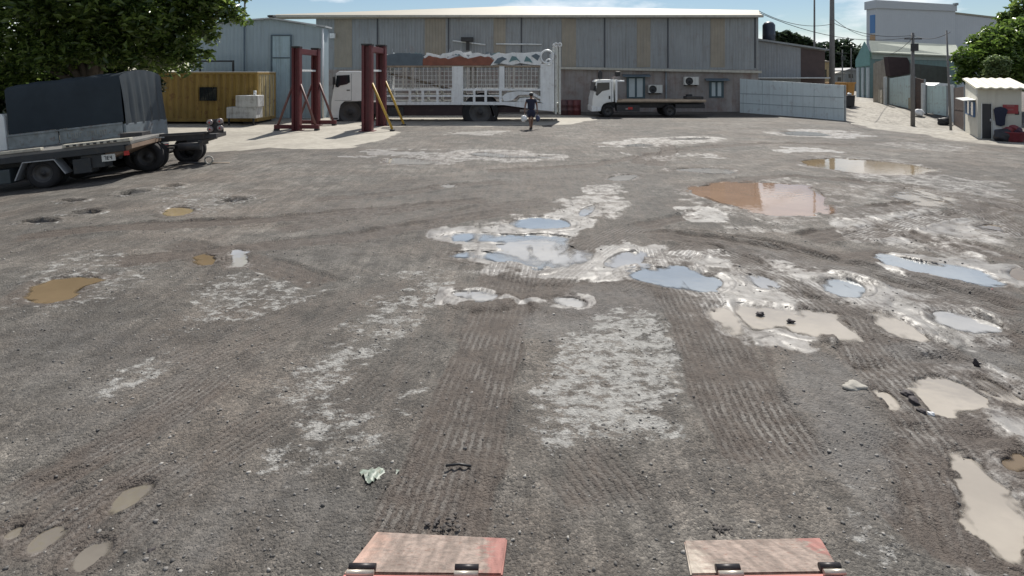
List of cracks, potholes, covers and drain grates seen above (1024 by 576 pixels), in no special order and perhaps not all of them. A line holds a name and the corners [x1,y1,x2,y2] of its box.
pothole [151,204,204,218]
pothole [813,271,878,298]
pothole [678,180,841,219]
pothole [428,228,591,248]
pothole [942,446,1024,574]
pothole [789,156,946,178]
pothole [442,287,504,303]
pothole [9,515,78,562]
pothole [918,305,1020,338]
pothole [540,292,597,310]
pothole [435,246,575,276]
pothole [9,216,67,225]
